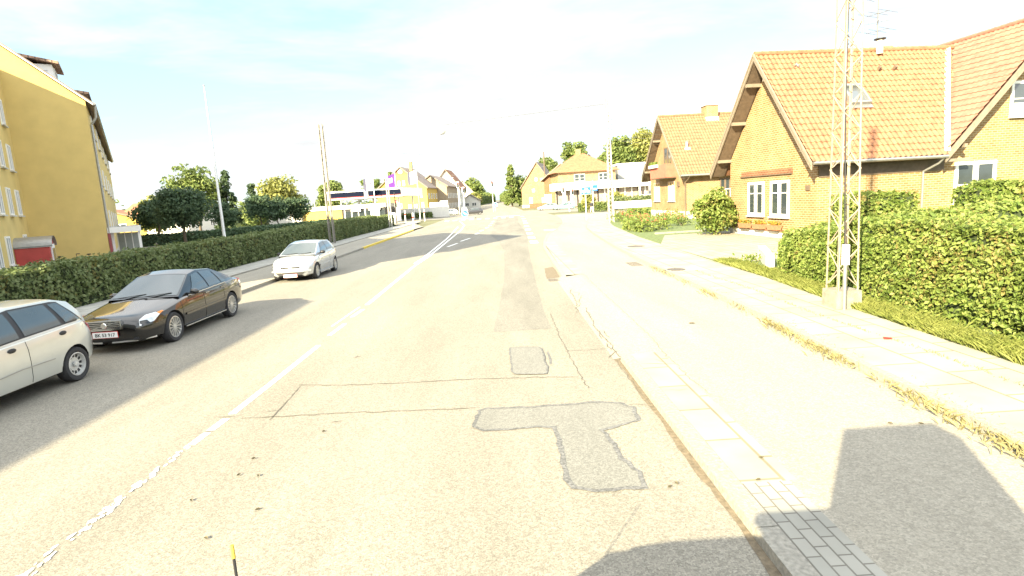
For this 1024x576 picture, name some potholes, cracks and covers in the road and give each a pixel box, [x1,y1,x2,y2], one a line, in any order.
crack [550,289,674,409]
